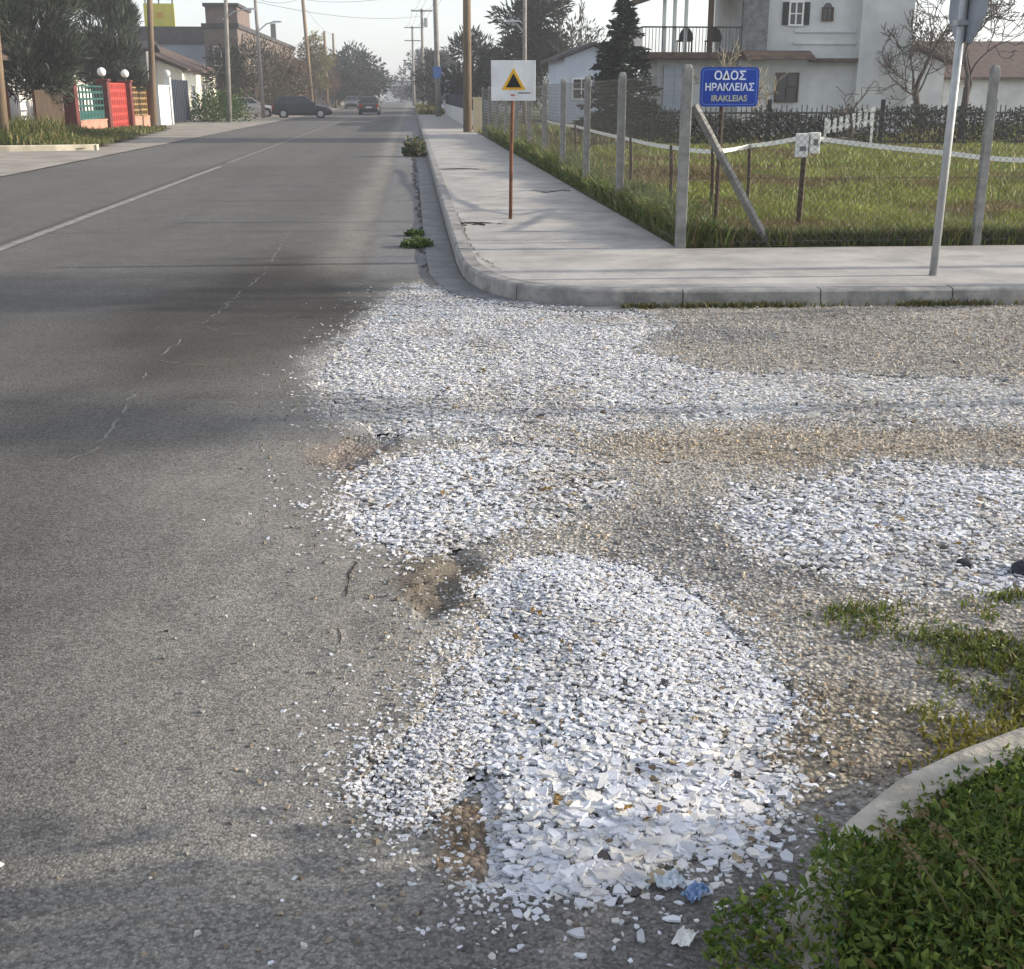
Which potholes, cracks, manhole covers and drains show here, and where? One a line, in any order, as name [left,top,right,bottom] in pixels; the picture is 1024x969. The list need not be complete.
pothole [300,434,408,474]
crack [327,539,416,707]
crack [68,232,290,462]
pothole [349,549,804,907]
